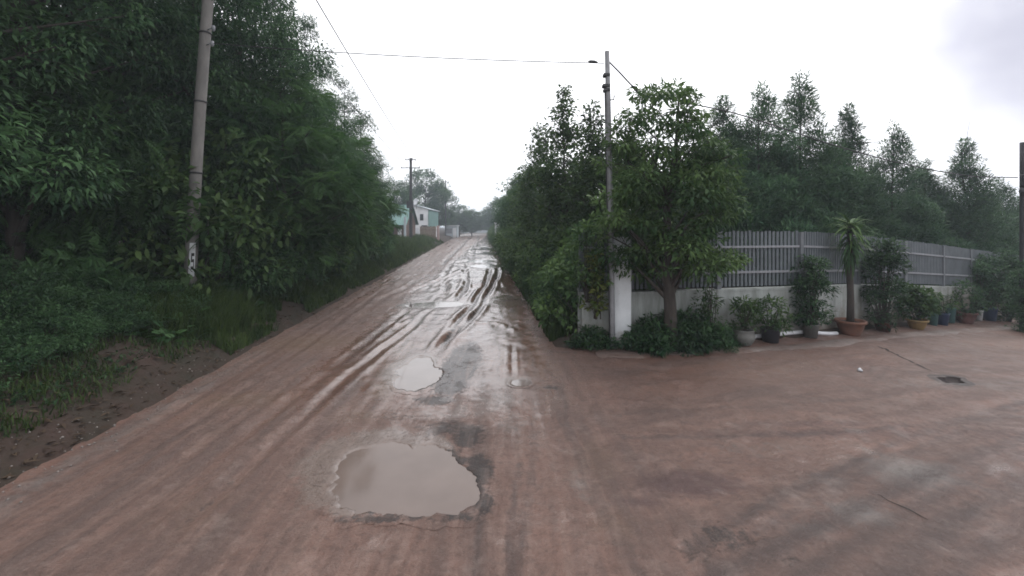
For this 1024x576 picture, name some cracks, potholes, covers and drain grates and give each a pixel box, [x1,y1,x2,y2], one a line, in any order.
crack [877,346,932,371]
crack [878,494,928,520]
pothole [381,355,454,396]
pothole [312,434,502,530]
